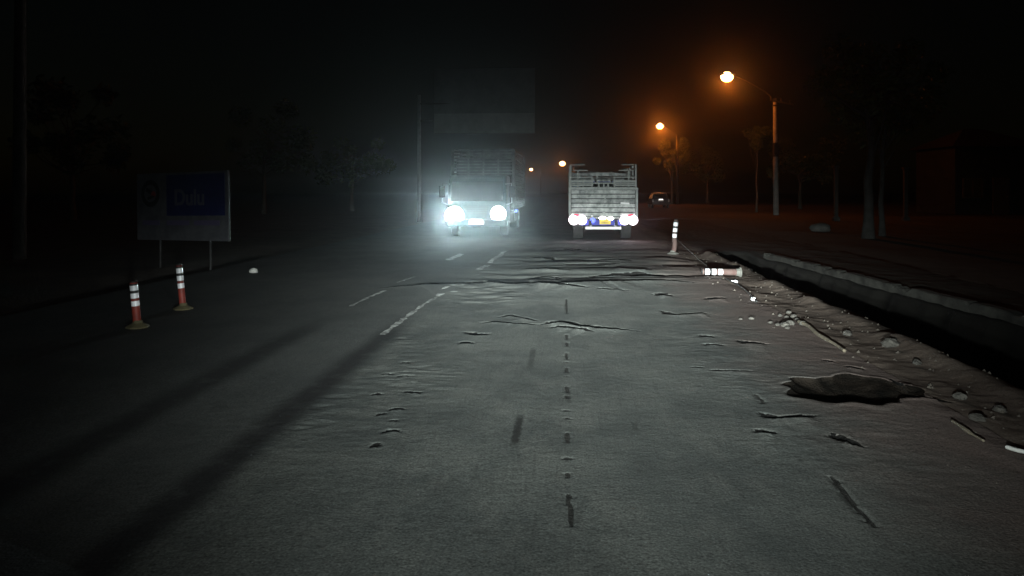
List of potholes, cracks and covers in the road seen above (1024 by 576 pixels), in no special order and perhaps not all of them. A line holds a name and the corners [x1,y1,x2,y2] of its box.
crack [370,362,421,448]
crack [460,315,635,344]
crack [754,394,864,448]
crack [830,476,877,528]
crack [373,249,724,315]
pothole [782,374,925,406]
